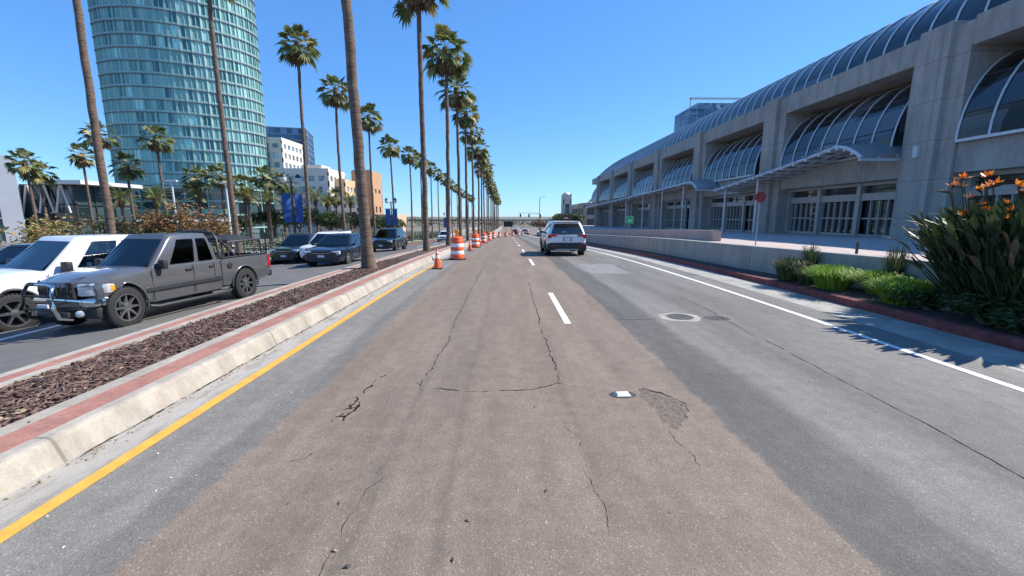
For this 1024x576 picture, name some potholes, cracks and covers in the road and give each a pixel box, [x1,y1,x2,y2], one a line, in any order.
crack [319,478,383,576]
pothole [638,387,689,429]
crack [415,274,574,392]
manhole cover [658,313,702,322]
